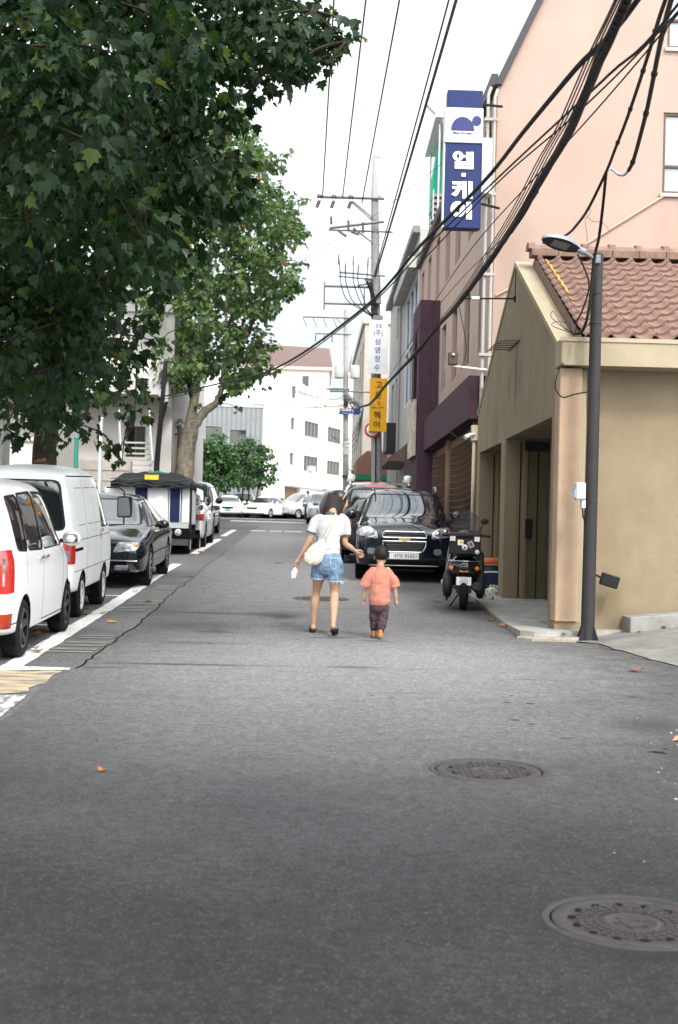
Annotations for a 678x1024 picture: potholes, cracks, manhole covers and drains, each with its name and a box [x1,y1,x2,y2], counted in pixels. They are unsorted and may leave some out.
manhole cover [540,894,678,951]
manhole cover [429,758,549,783]
